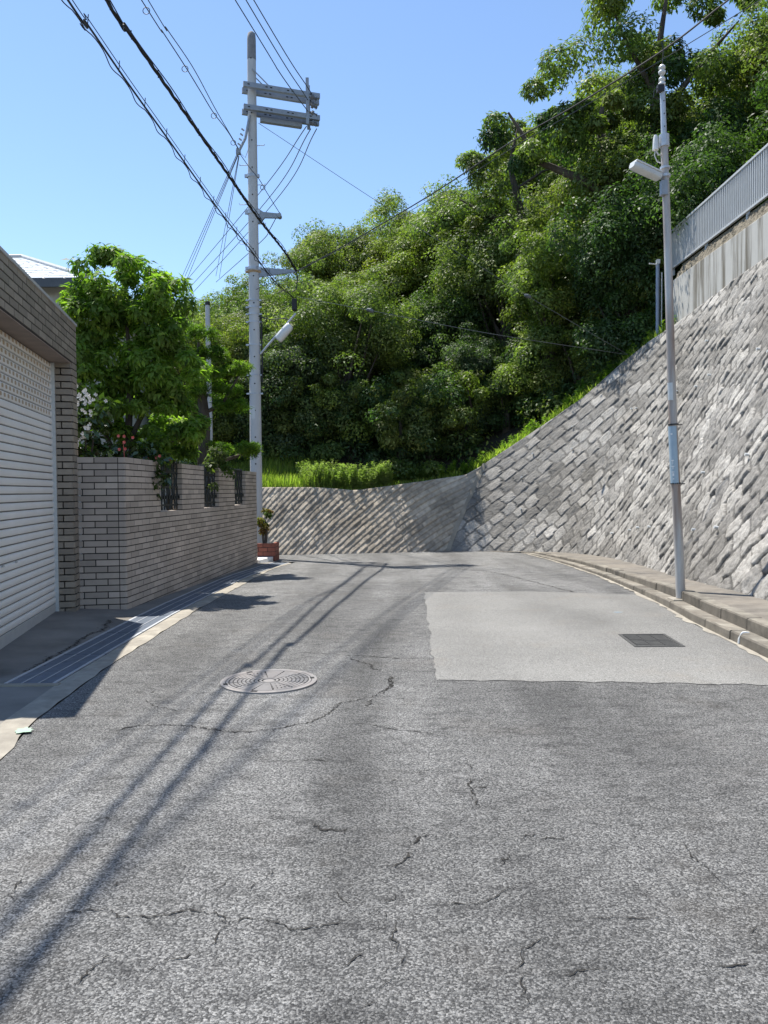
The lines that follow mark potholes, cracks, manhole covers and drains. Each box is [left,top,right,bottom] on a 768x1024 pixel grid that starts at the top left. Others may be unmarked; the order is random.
crack [66,871,362,945]
manhole cover [220,669,317,694]
drain grate [106,615,172,633]
crack [515,938,542,1005]
drain grate [62,632,143,654]
crack [383,896,407,985]
crack [387,834,427,867]
crack [313,820,347,833]
crack [717,926,768,967]
crack [22,620,113,672]
crack [57,947,118,991]
drain grate [165,594,212,603]
